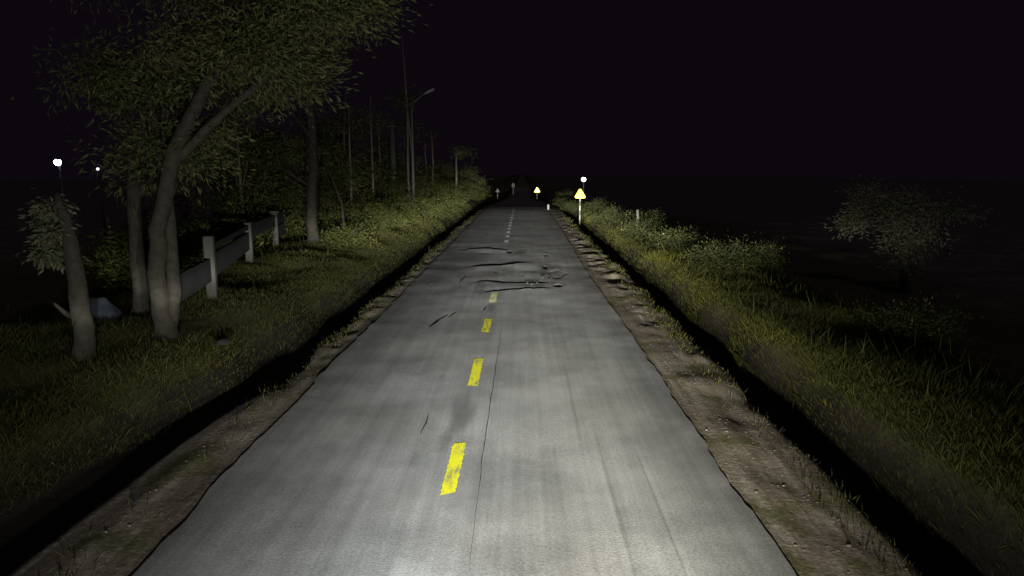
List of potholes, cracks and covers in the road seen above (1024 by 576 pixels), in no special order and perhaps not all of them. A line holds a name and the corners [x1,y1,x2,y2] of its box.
crack [429,311,457,327]
crack [469,328,502,570]
pothole [547,269,568,280]
